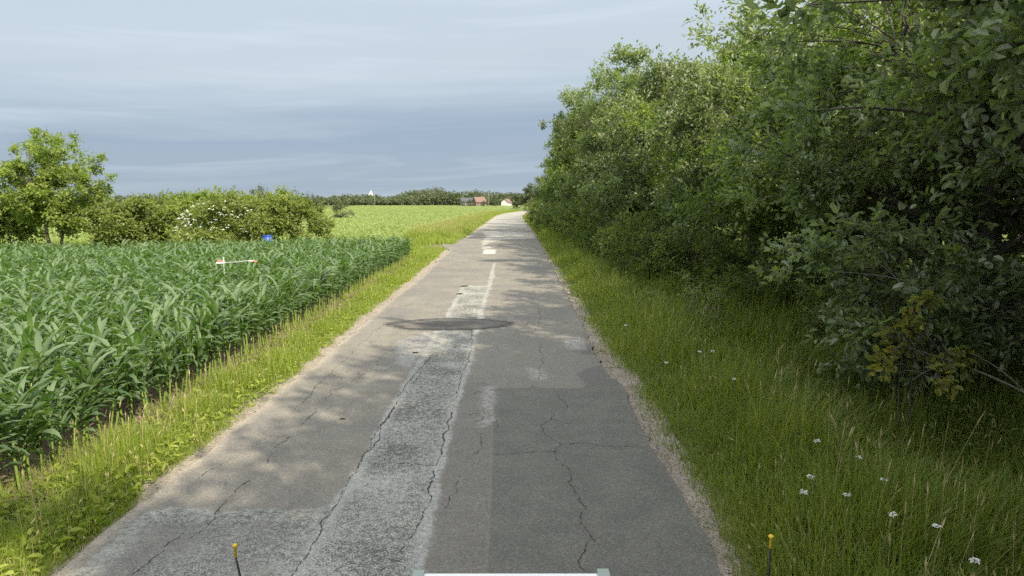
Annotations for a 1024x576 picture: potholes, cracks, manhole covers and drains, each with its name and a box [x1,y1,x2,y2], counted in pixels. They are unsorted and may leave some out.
crack [401,333,498,554]
crack [291,357,431,576]
crack [533,399,649,571]
